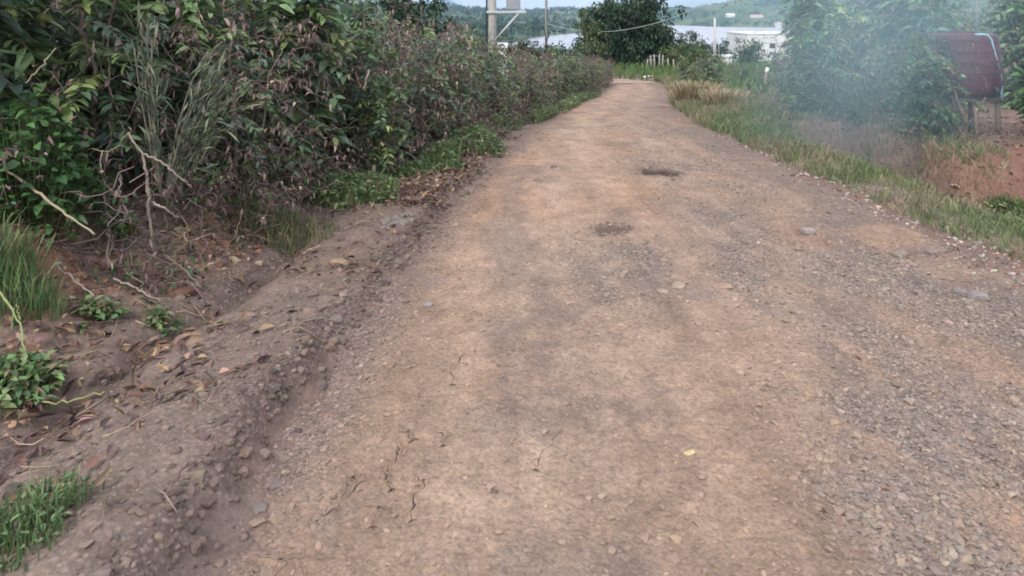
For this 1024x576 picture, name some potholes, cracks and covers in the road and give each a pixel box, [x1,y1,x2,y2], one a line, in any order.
crack [315,429,456,528]
crack [531,425,569,472]
pothole [636,166,687,177]
pothole [590,221,633,236]
crack [446,349,468,385]
